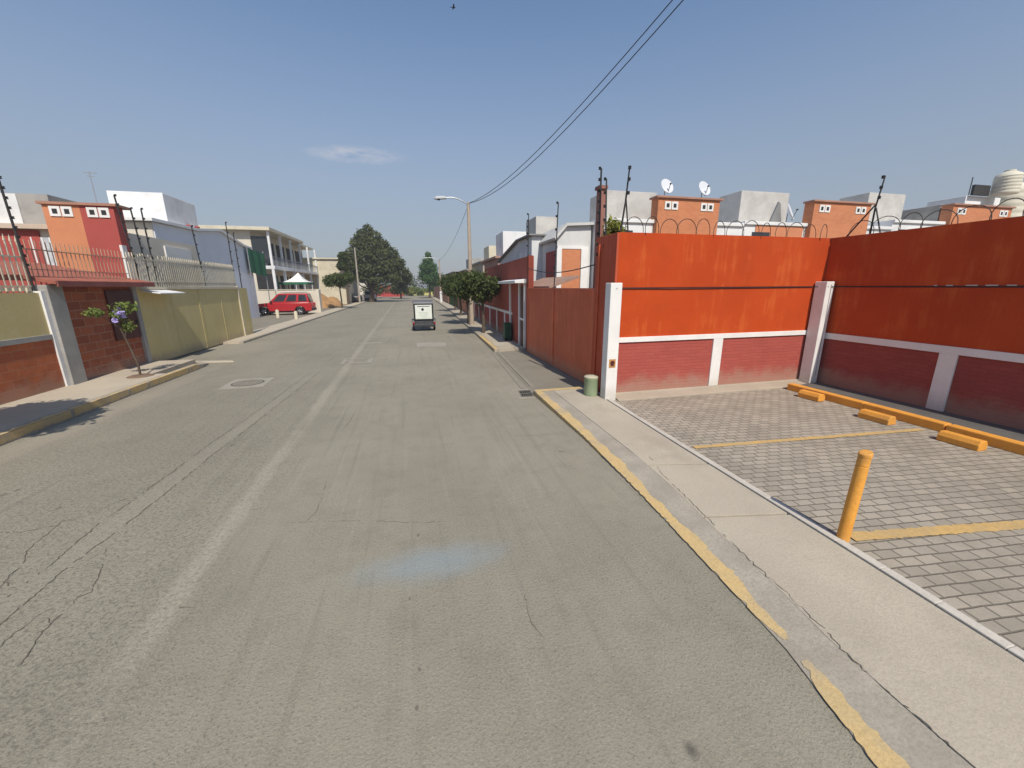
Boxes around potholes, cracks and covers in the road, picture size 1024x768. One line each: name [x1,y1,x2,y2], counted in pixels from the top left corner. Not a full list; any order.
crack [0,370,319,666]
drain grate [511,389,535,399]
manhole cover [217,377,275,390]
